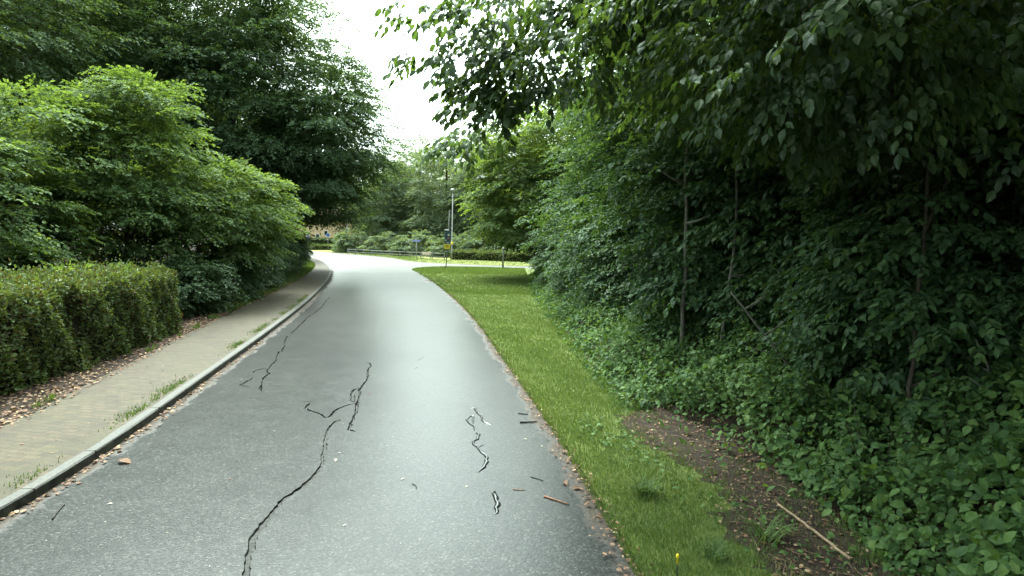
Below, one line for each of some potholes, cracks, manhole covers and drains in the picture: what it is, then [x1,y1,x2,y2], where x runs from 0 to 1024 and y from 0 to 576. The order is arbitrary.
crack [242,363,371,576]
crack [240,297,330,392]
crack [492,491,501,515]
crack [466,407,491,473]
